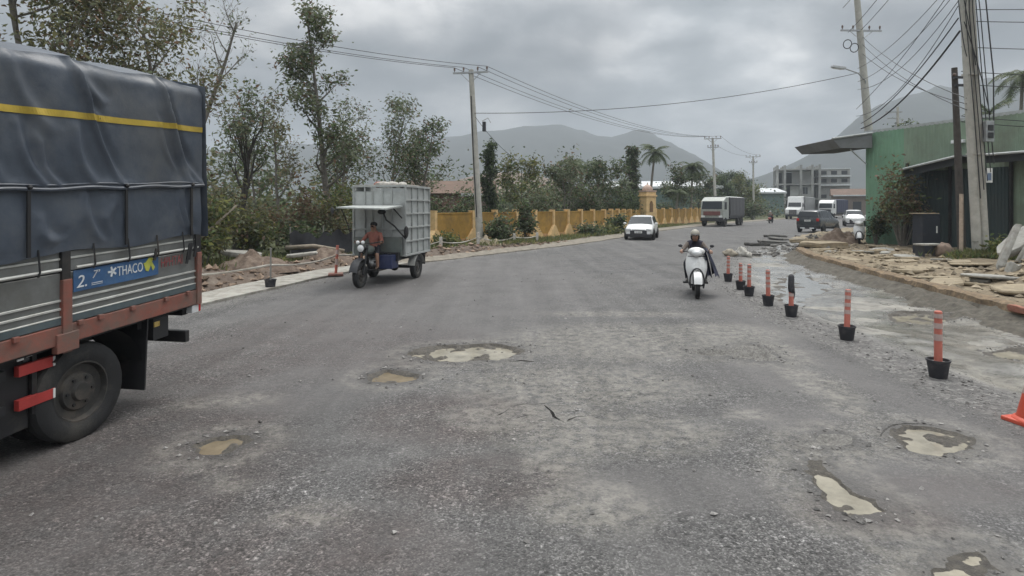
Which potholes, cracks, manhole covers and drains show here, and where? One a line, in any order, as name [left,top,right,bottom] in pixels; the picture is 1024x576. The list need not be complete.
pothole [887,311,960,325]
pothole [367,370,420,384]
pothole [930,552,1001,576]
pothole [889,425,976,457]
pothole [406,343,526,363]
pothole [982,347,1024,360]
pothole [803,460,885,516]
pothole [190,435,254,456]
crack [497,403,592,430]
